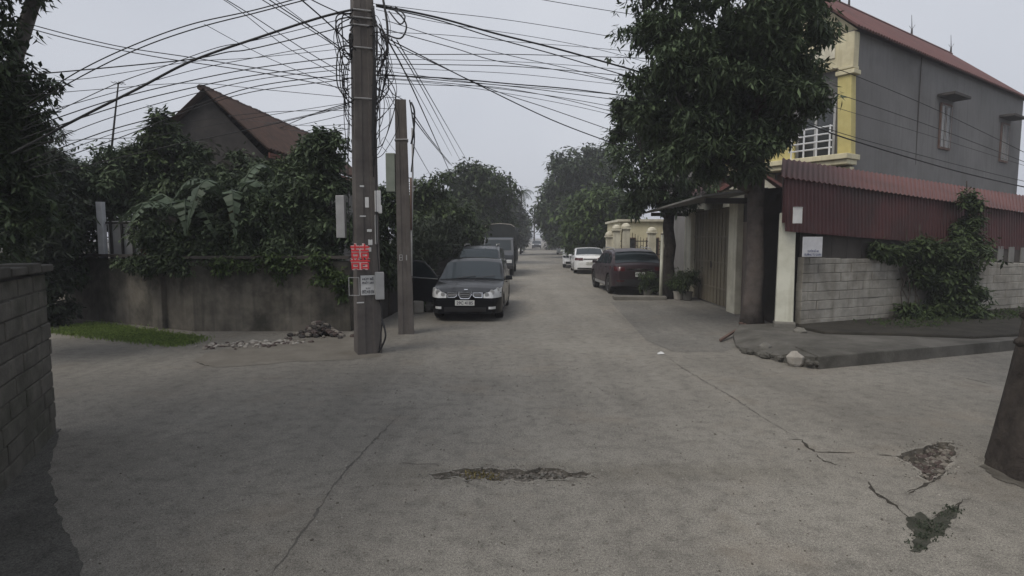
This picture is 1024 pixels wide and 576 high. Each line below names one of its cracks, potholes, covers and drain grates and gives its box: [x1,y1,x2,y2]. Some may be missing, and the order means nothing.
pothole [886,436,978,485]
crack [868,475,971,518]
pothole [388,462,596,491]
crack [665,355,853,465]
crack [272,412,448,575]
